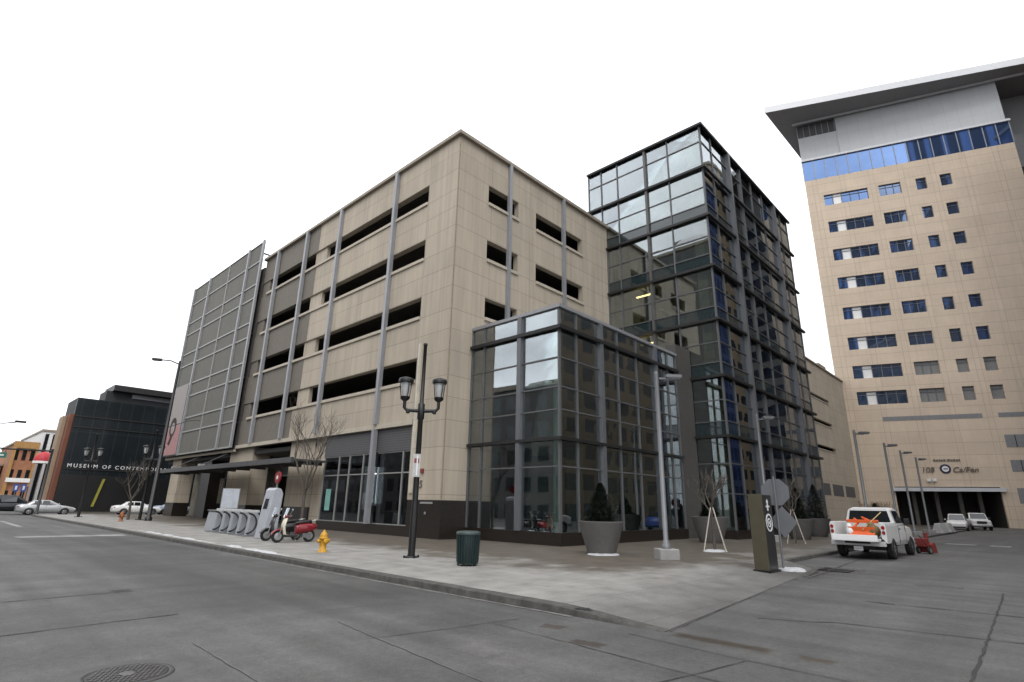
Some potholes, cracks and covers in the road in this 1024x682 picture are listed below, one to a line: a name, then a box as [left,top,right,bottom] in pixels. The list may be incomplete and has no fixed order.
manhole cover [75,662,175,682]
crack [915,584,1004,682]
